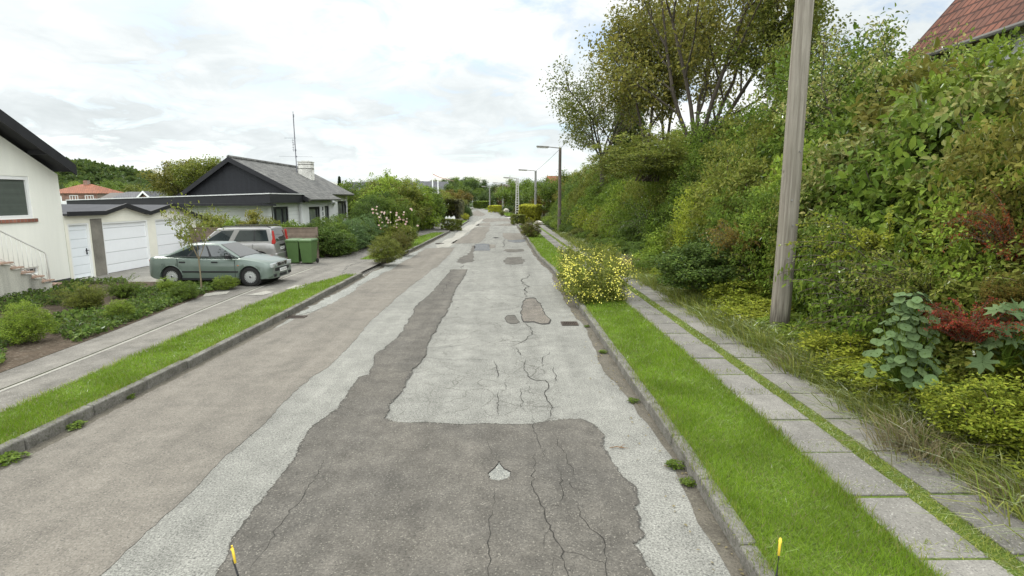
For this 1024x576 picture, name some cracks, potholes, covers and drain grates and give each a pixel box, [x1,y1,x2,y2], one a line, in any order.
crack [429,324,607,576]
crack [250,461,324,568]
pothole [488,461,511,480]
